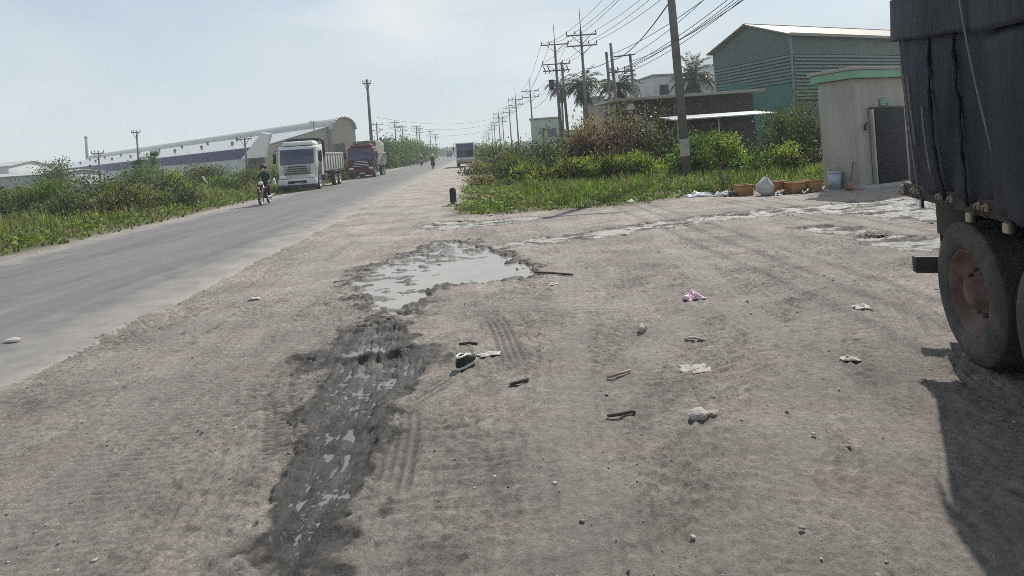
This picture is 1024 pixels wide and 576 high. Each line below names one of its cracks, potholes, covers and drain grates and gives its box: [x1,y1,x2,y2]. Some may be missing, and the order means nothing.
pothole [334,237,548,327]
pothole [833,232,940,252]
pothole [785,224,892,239]
